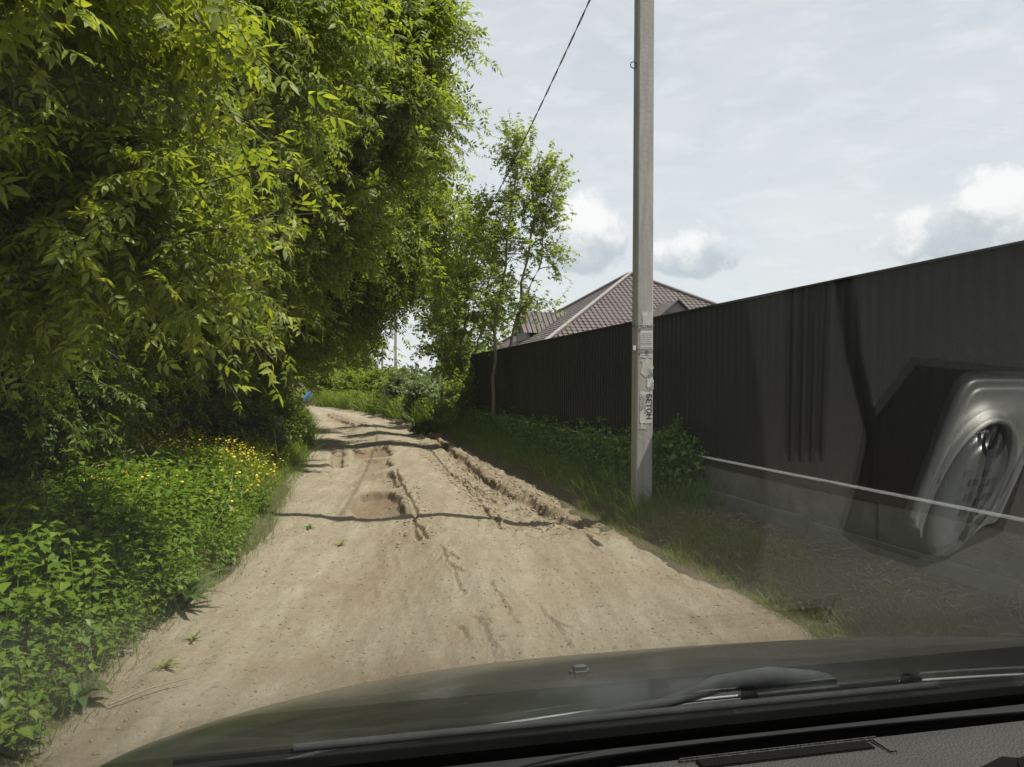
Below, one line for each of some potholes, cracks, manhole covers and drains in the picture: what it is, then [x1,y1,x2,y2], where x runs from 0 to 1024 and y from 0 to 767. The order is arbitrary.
pothole [329,450,347,468]
pothole [347,491,409,519]
pothole [352,445,393,459]
pothole [355,458,394,472]
